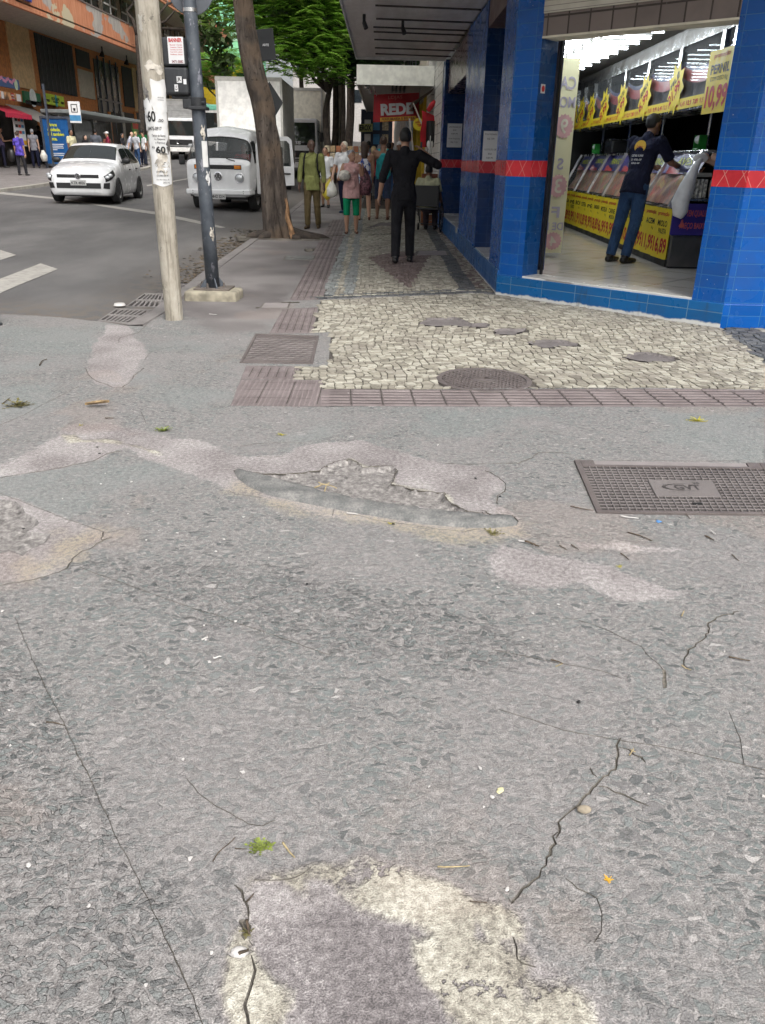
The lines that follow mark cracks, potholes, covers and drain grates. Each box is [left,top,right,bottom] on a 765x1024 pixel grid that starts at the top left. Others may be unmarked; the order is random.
manhole cover [239,333,319,364]
crack [508,738,649,943]
drain grate [98,308,153,325]
manhole cover [436,368,532,393]
pothole [259,459,470,512]
manhole cover [574,460,765,516]
crack [683,611,739,671]
drain grate [126,293,163,307]
